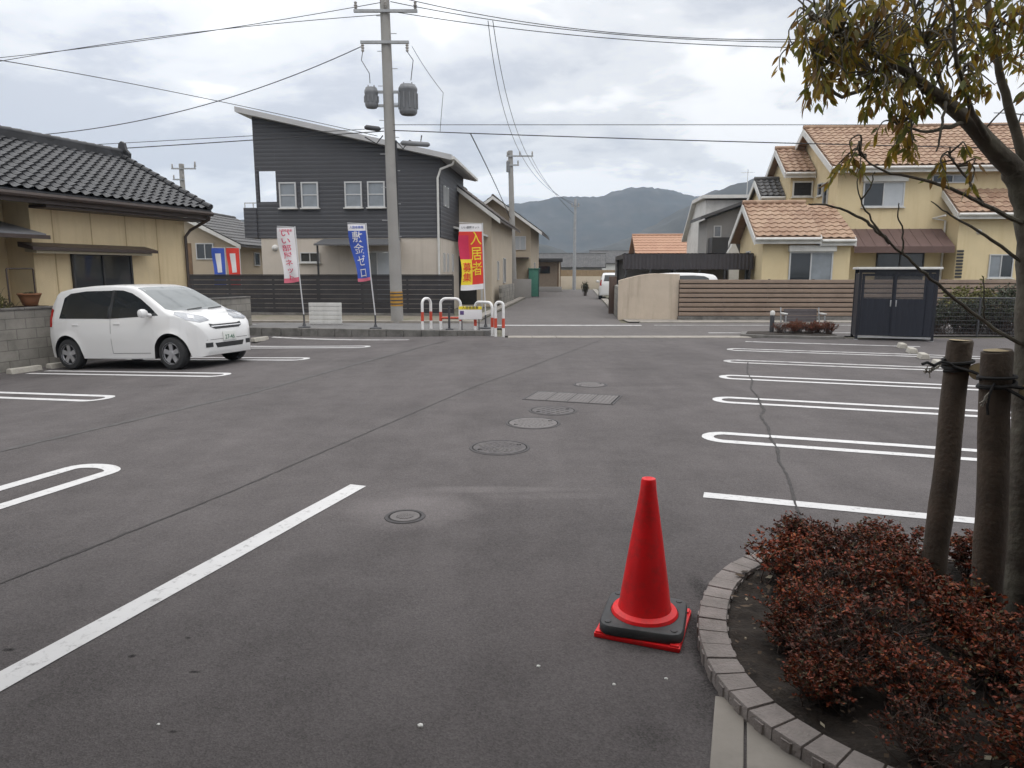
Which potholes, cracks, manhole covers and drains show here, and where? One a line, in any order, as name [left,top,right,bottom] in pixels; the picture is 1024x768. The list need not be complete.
crack [746,362,802,519]
manhole cover [384,509,426,524]
manhole cover [469,440,530,455]
manhole cover [529,406,577,416]
manhole cover [506,417,561,429]
